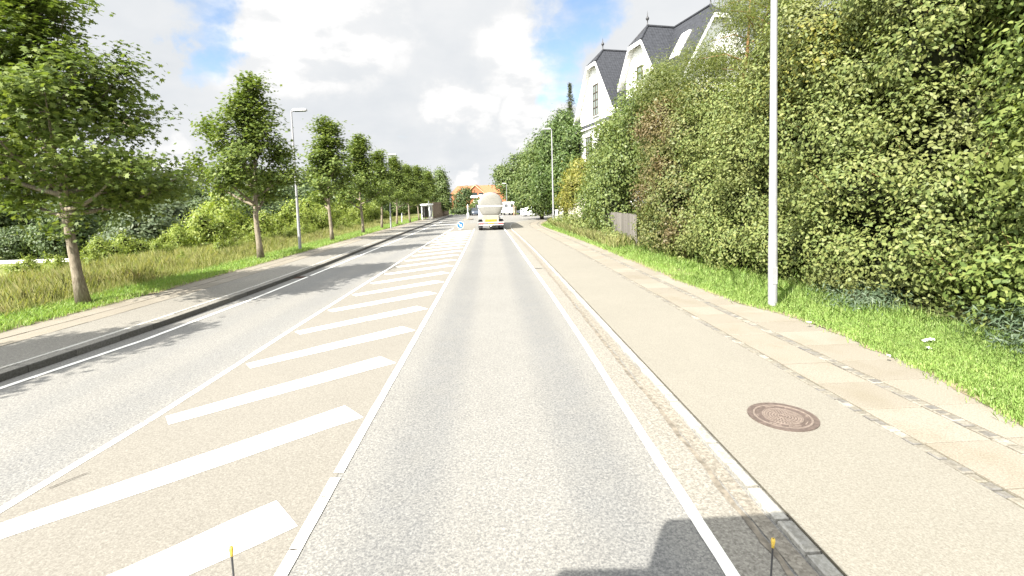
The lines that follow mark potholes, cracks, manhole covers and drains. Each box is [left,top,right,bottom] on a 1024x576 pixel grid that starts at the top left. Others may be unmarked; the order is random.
manhole cover [747,402,820,432]
